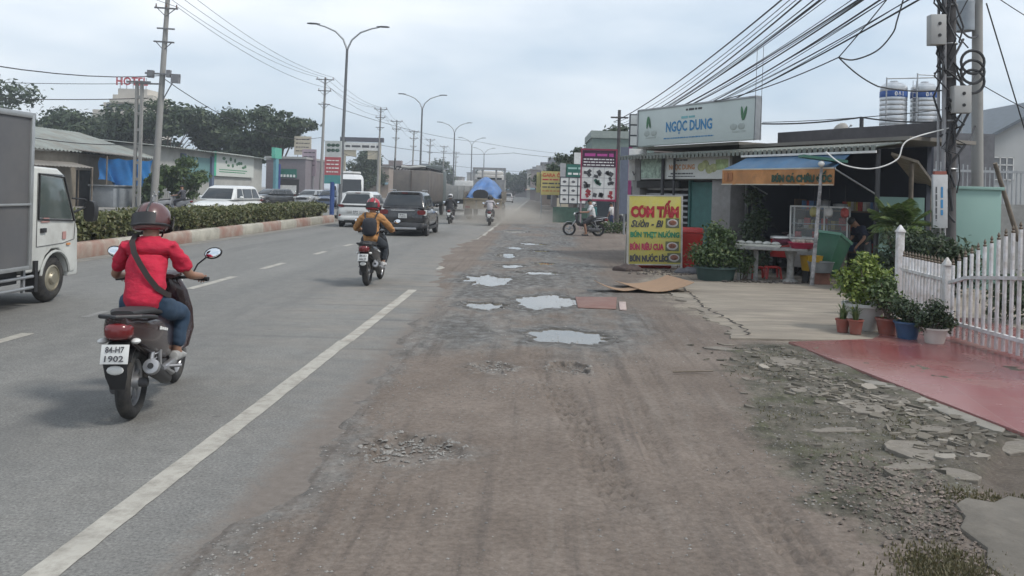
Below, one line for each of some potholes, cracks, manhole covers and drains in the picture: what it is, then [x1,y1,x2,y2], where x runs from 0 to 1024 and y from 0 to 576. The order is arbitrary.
pothole [510,326,620,347]
crack [681,287,753,335]
pothole [542,360,595,376]
pothole [462,360,525,376]
pothole [506,293,577,313]
pothole [448,272,522,288]
pothole [456,300,514,311]
pothole [350,430,479,471]
